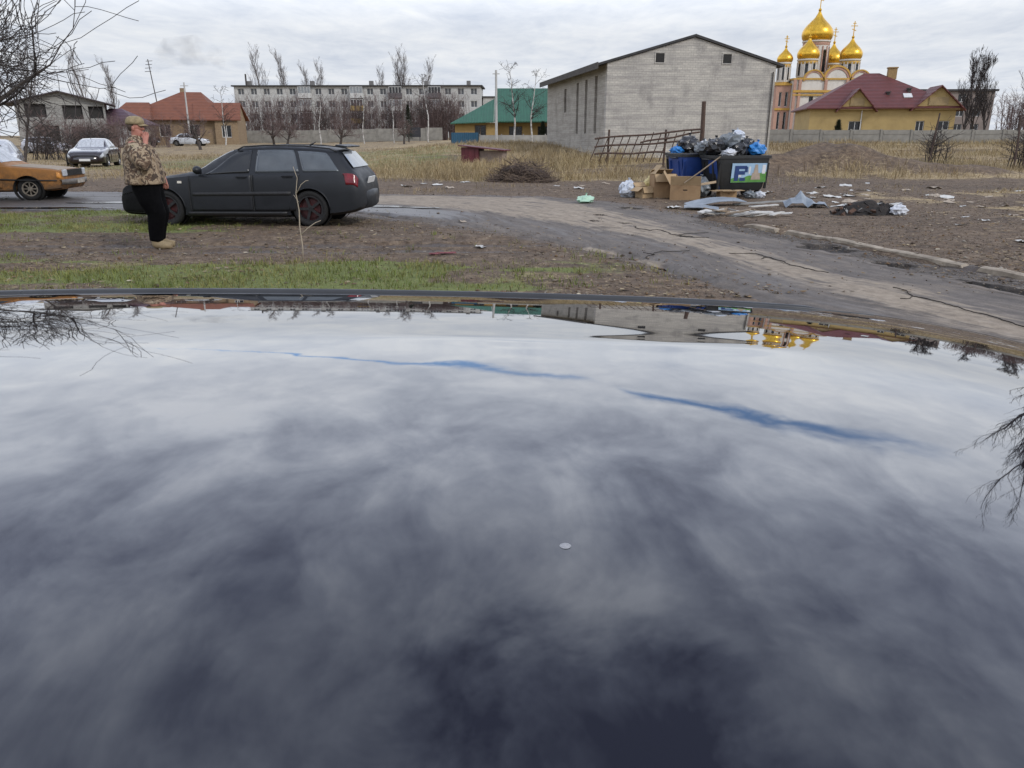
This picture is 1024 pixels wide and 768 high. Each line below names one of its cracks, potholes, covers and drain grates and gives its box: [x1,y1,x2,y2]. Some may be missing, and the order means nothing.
crack [893,287,1024,327]
crack [634,227,709,259]
pothole [783,242,881,258]
crack [730,253,829,273]
pothole [861,259,931,273]
